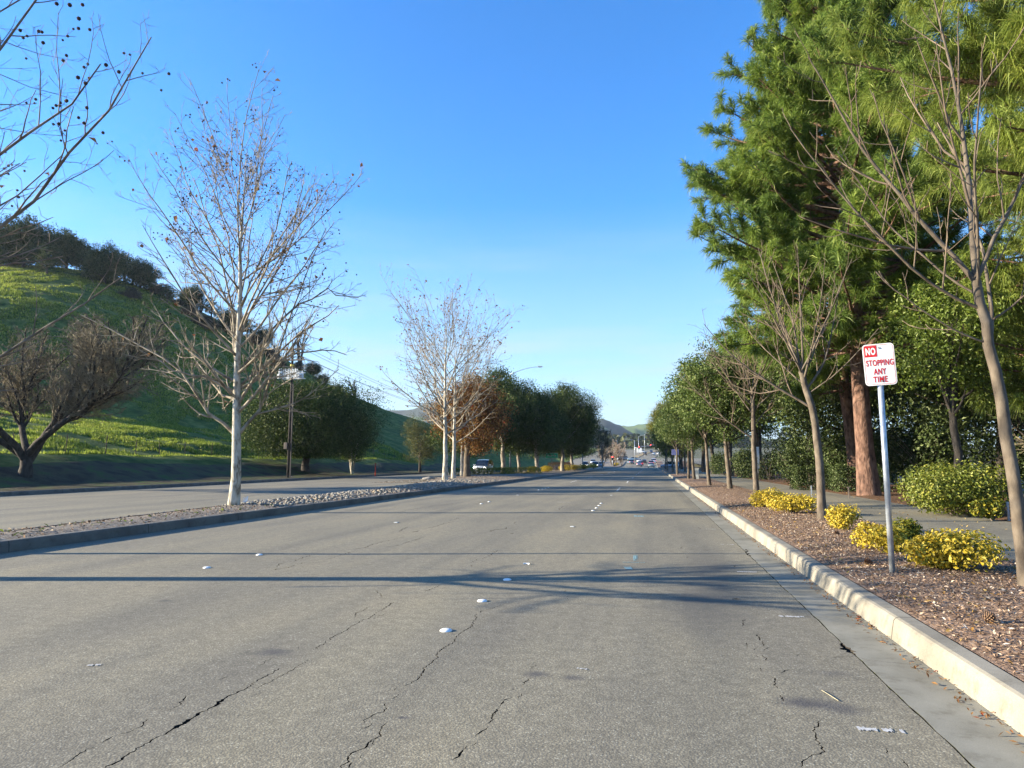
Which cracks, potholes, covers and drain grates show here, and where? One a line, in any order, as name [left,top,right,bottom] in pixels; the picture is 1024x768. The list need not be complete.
crack [801,721,825,767]
crack [450,665,536,761]
crack [65,586,438,768]
crack [742,620,911,701]
crack [340,607,495,768]
